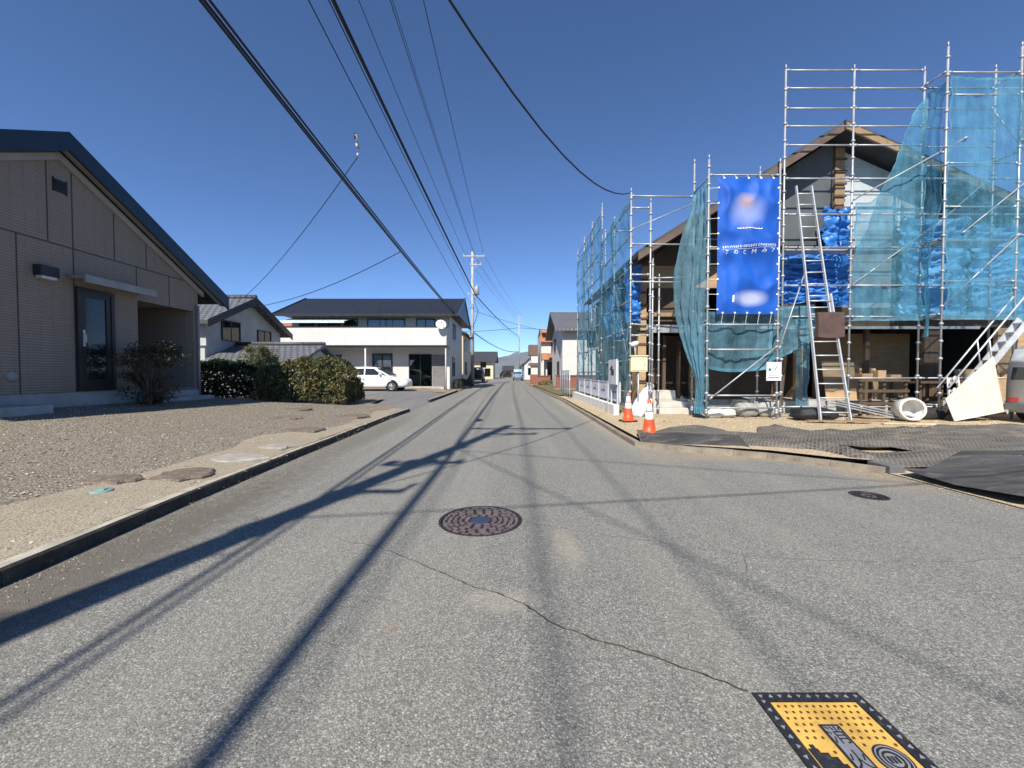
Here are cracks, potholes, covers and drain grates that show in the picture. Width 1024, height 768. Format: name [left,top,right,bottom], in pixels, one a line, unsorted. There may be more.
manhole cover [848,491,891,501]
manhole cover [439,506,522,537]
crack [340,539,748,692]
